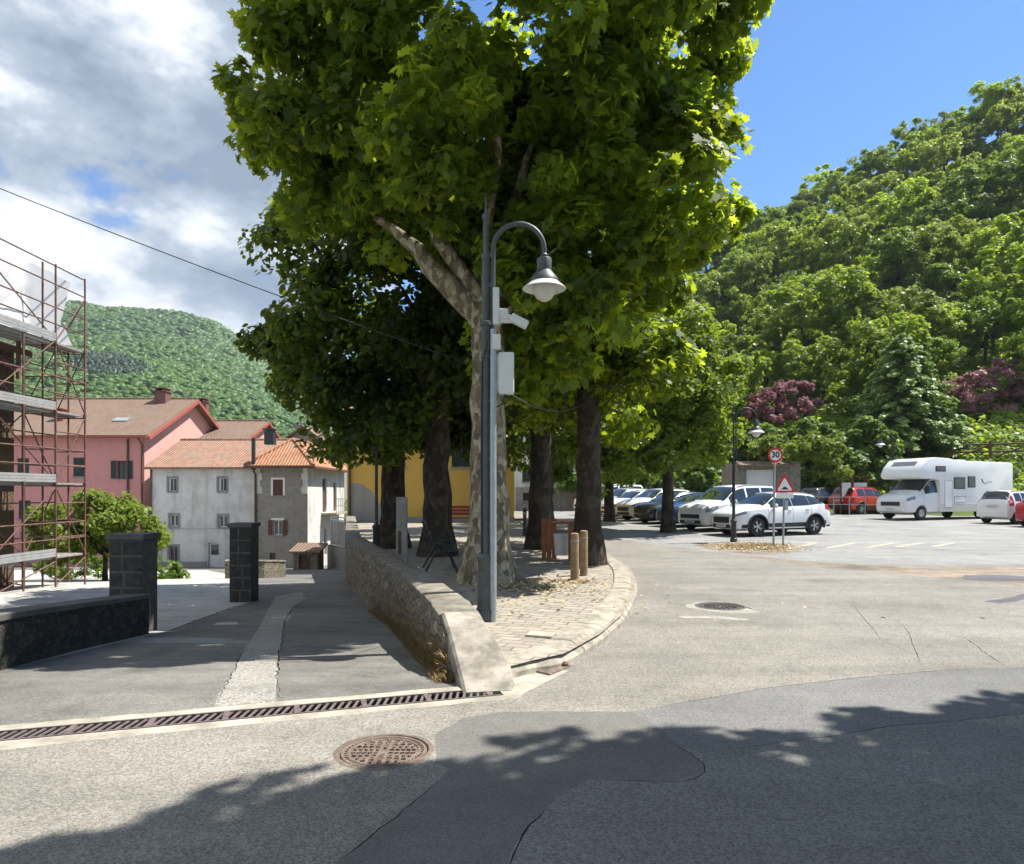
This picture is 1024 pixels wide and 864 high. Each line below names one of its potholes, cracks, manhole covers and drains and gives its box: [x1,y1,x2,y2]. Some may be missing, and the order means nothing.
drain grate [0,690,503,741]
manhole cover [333,734,434,771]
manhole cover [695,602,747,610]
